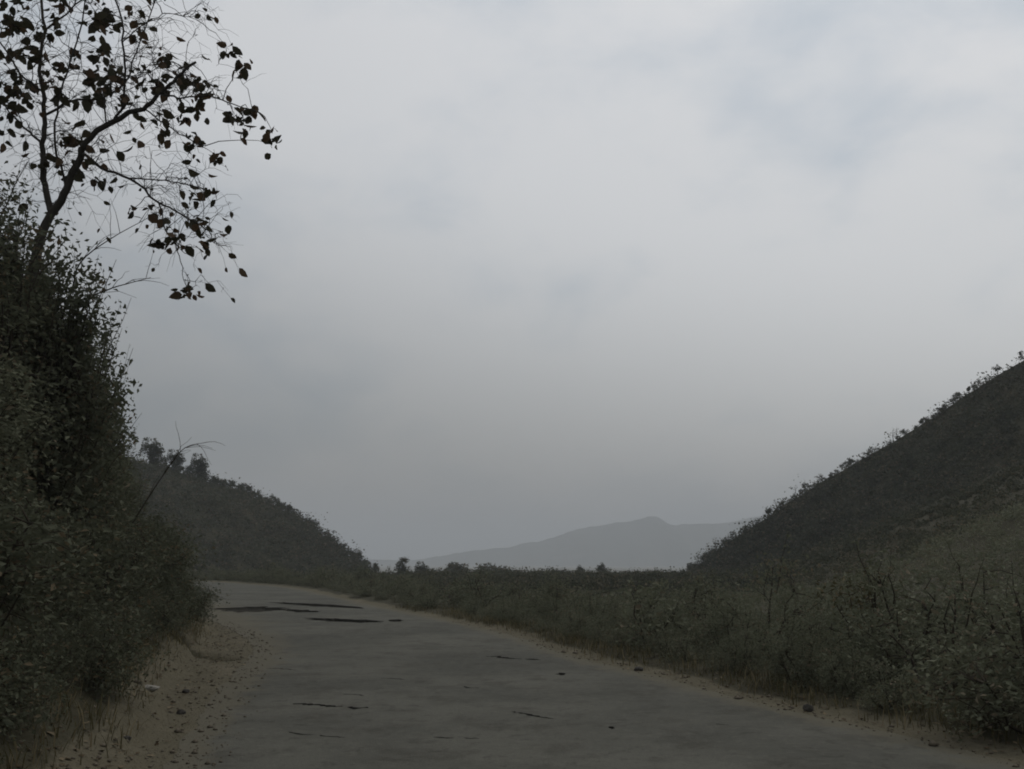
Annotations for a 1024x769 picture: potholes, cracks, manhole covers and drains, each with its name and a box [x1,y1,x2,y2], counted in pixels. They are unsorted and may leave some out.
crack [512,711,553,719]
crack [293,694,369,709]
